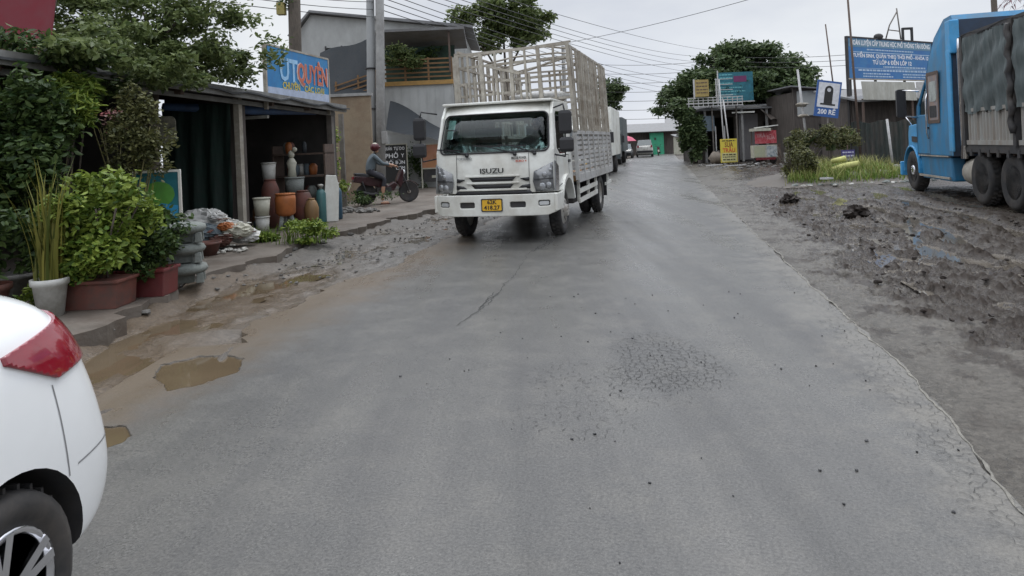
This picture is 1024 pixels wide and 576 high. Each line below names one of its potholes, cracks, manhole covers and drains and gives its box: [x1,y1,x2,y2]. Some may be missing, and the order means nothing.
crack [500,334,737,441]
pothole [153,355,244,391]
pothole [104,425,132,448]
crack [459,238,558,324]
